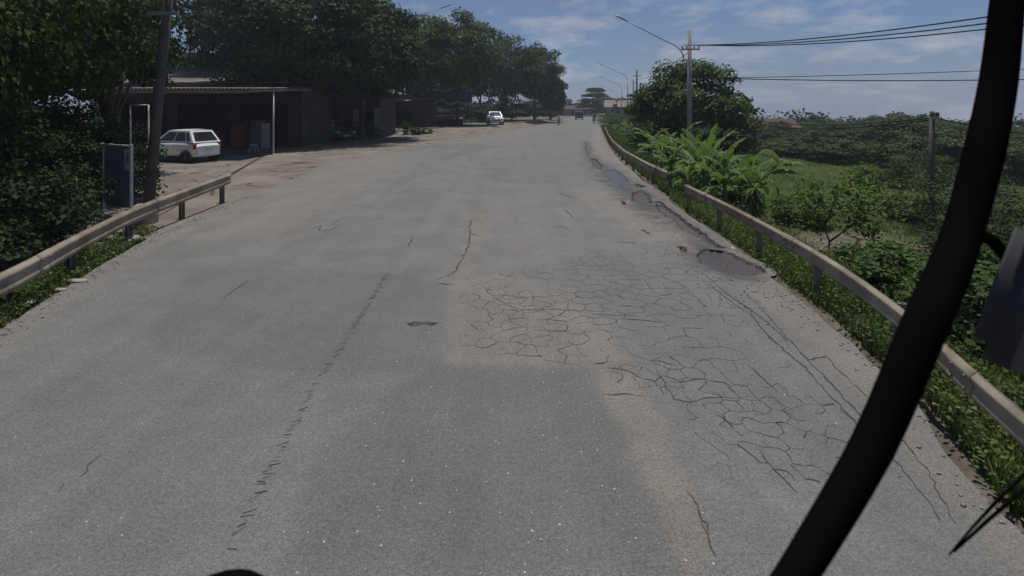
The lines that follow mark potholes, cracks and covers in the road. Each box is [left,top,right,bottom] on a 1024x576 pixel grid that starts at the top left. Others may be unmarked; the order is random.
crack [689,493,716,556]
pothole [621,189,662,206]
crack [461,249,956,523]
pothole [395,317,450,331]
pothole [597,169,638,187]
pothole [685,246,777,279]
